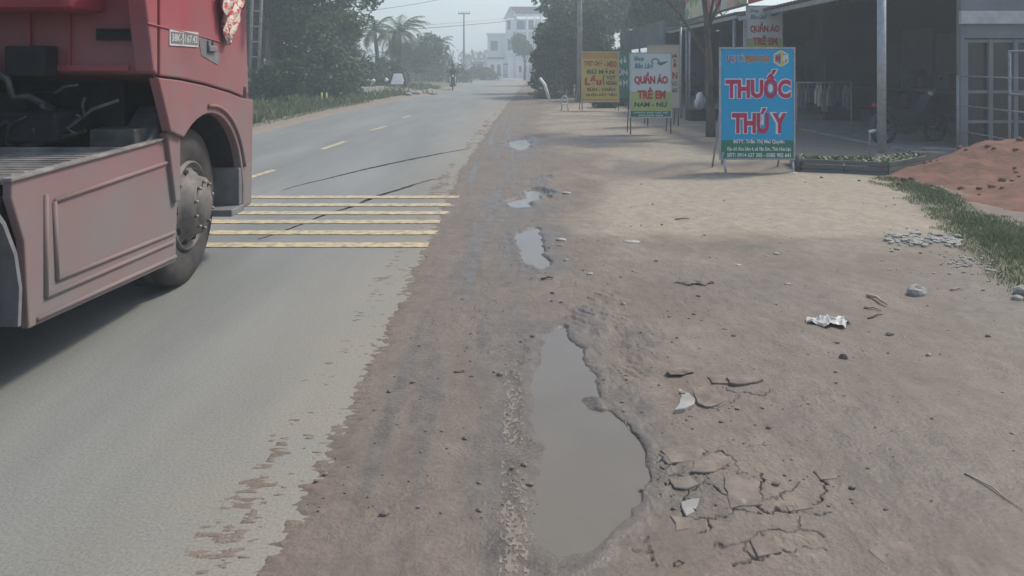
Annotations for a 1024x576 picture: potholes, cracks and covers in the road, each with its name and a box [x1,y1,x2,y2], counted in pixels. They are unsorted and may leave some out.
pothole [514,324,664,572]
crack [632,386,832,570]
pothole [496,186,555,208]
pothole [513,226,556,270]
pothole [506,137,534,150]
